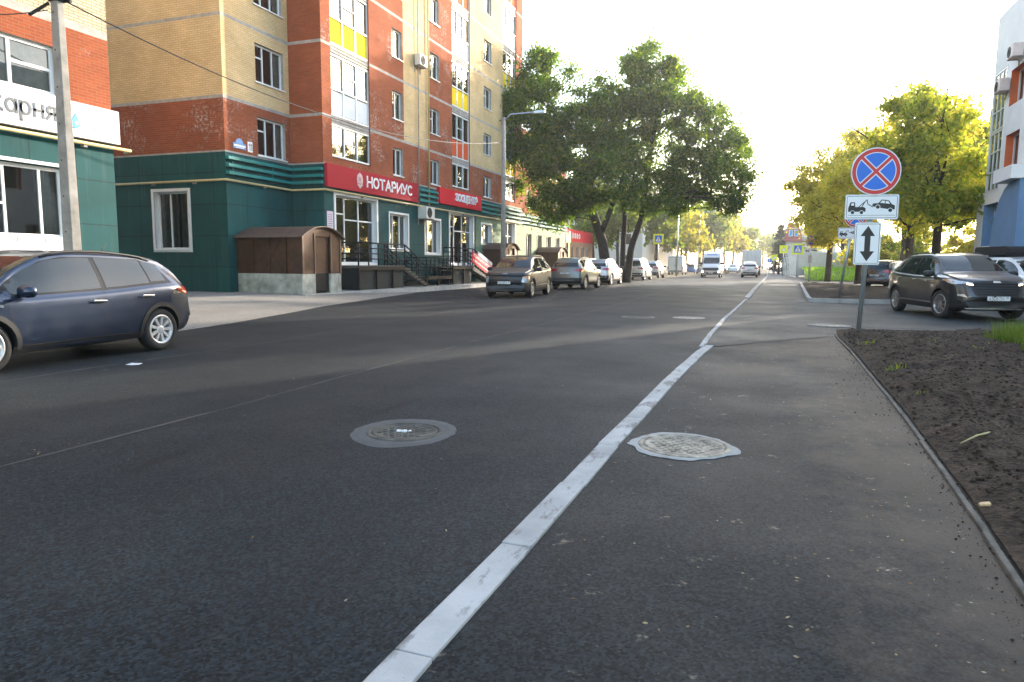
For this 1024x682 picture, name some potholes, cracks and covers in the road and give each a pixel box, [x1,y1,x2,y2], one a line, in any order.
manhole cover [627,432,741,461]
manhole cover [350,419,457,448]
